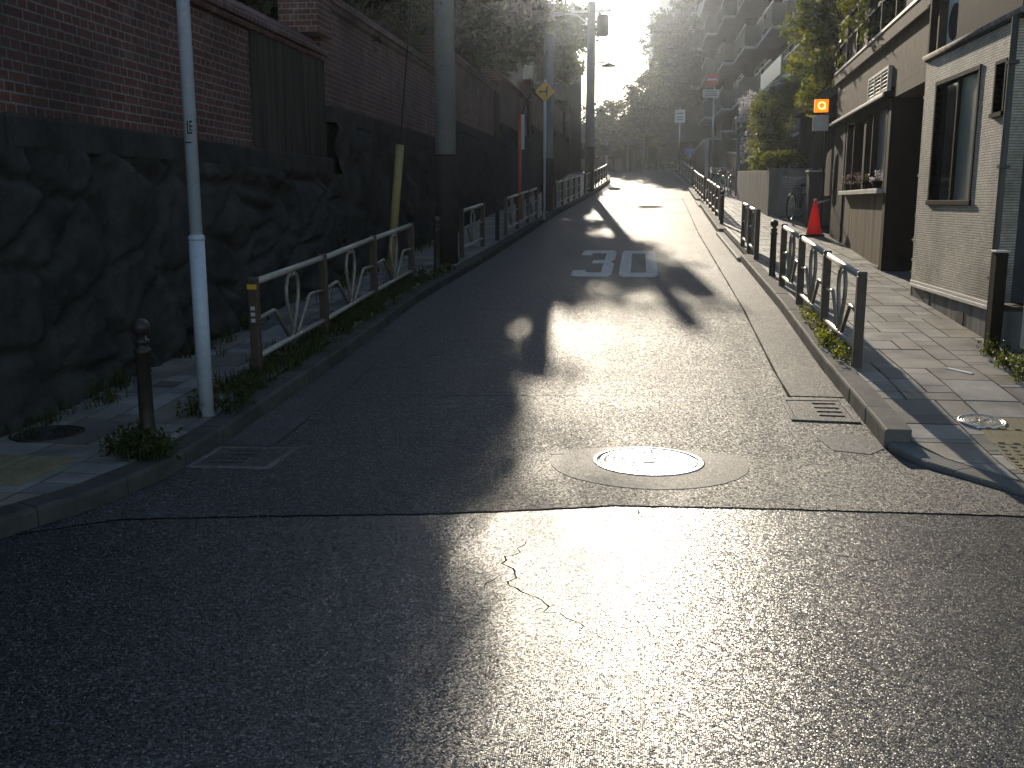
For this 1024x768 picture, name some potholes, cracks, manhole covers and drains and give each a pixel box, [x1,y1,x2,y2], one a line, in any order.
manhole cover [550,447,750,490]
manhole cover [8,425,86,443]
manhole cover [957,414,1007,428]
crack [484,536,614,644]
